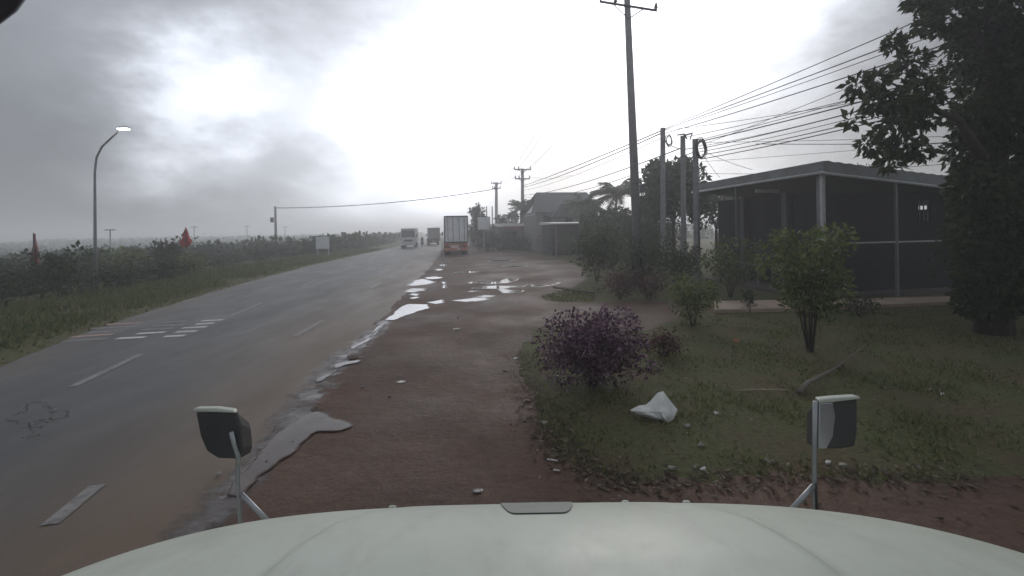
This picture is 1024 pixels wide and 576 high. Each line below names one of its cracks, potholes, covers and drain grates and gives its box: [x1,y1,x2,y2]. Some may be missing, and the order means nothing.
crack [5,402,69,435]
